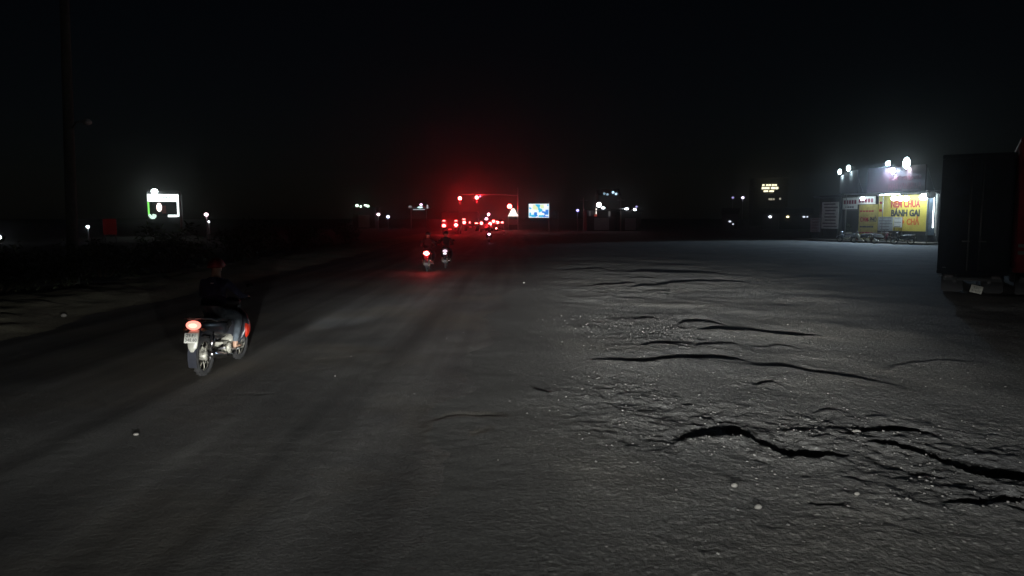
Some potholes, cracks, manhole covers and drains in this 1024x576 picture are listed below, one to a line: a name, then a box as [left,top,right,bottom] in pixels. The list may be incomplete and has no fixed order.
crack [585,275,678,294]
crack [799,497,857,509]
crack [427,411,508,436]
crack [748,375,785,387]
crack [640,338,798,348]
